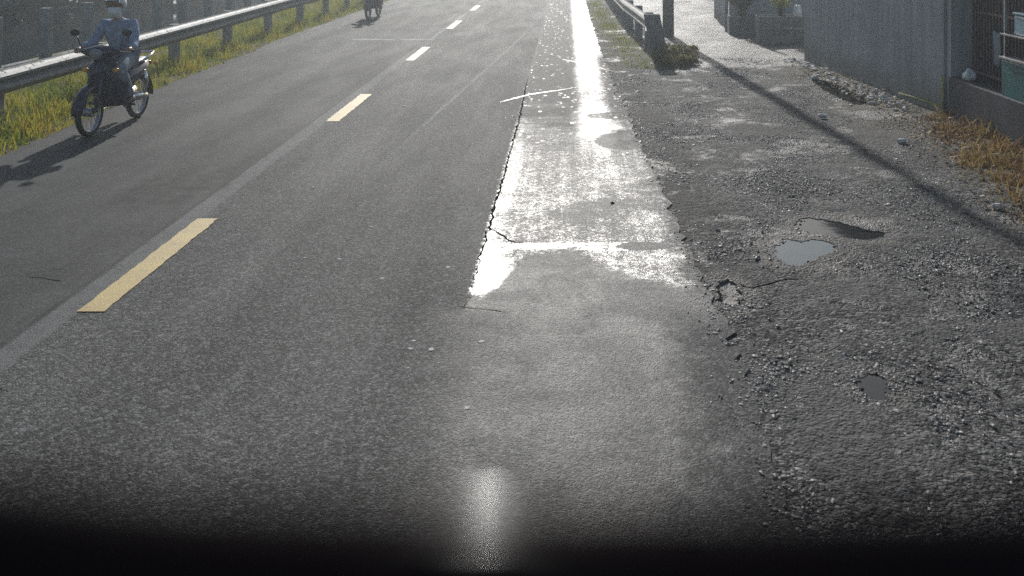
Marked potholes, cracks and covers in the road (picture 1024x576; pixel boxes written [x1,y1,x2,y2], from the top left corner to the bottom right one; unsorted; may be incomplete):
pothole [794,217,885,240]
crack [707,279,797,290]
pothole [813,79,866,105]
pothole [773,239,839,266]
pothole [715,279,743,305]
crack [464,60,609,313]
pothole [853,373,892,401]
